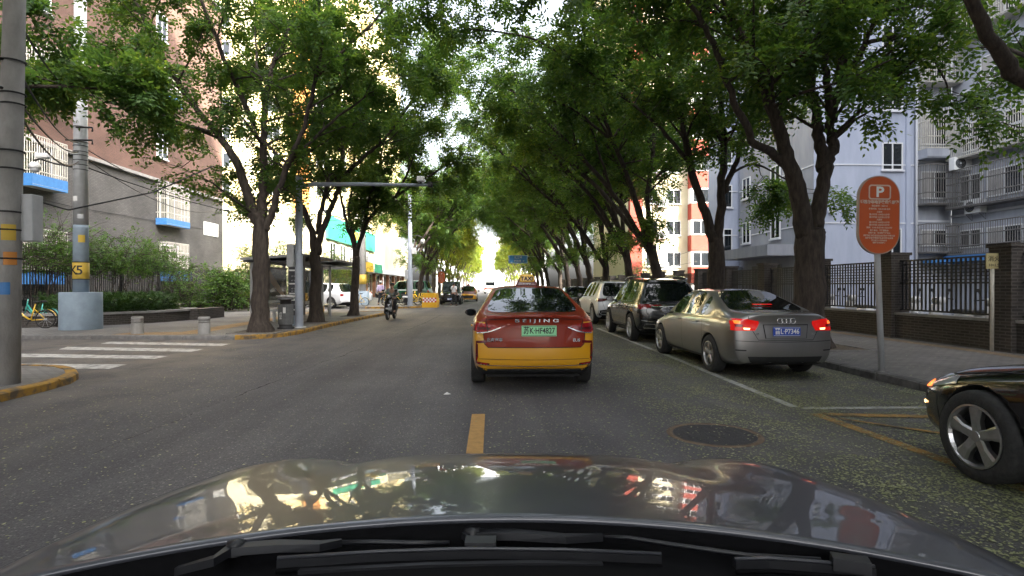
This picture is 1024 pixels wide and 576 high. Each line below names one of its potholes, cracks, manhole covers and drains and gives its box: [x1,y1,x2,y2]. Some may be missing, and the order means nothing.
manhole cover [666,423,765,448]
